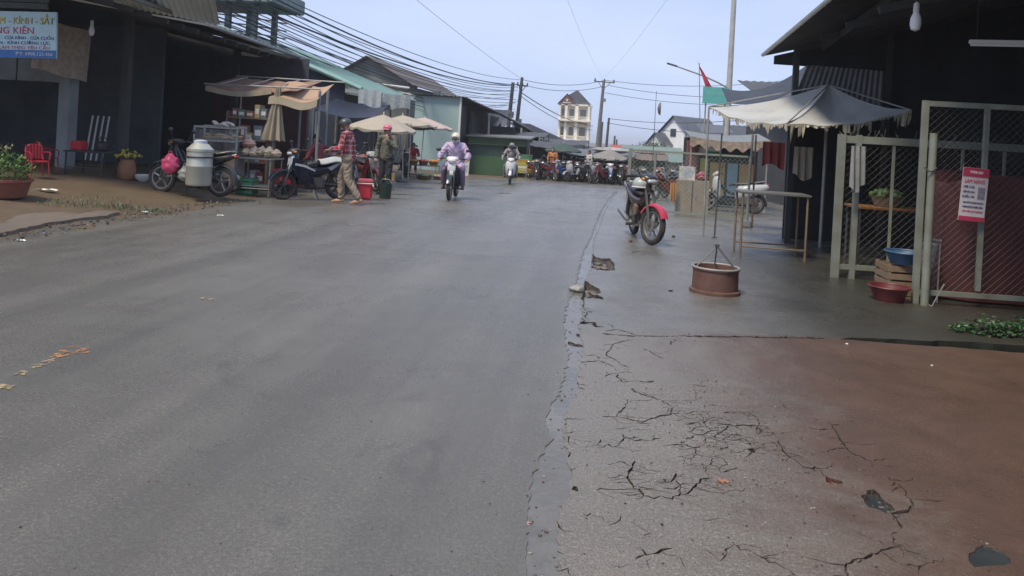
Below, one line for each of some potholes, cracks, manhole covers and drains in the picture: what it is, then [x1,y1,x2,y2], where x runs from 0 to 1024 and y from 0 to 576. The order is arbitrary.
pothole [581,281,604,300]
pothole [591,254,615,271]
crack [563,298,946,576]
pothole [860,489,895,513]
pothole [969,545,1011,567]
